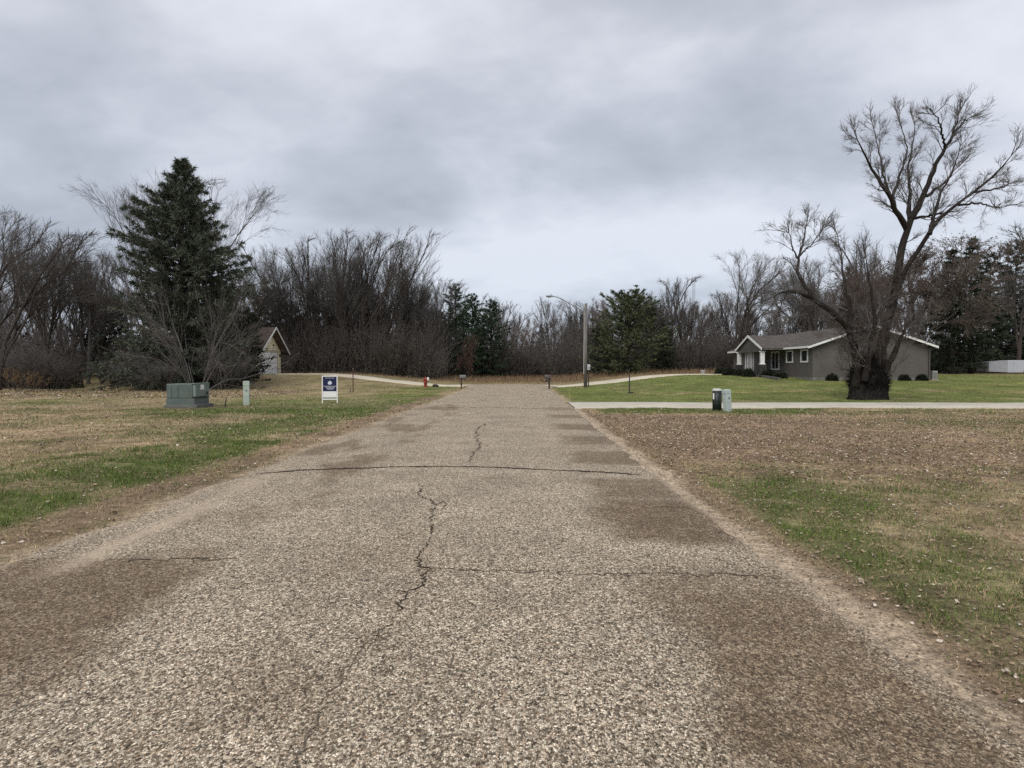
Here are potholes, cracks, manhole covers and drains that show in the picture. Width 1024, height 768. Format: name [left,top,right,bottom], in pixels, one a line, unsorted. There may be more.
crack [261,424,641,475]
crack [296,485,780,768]
